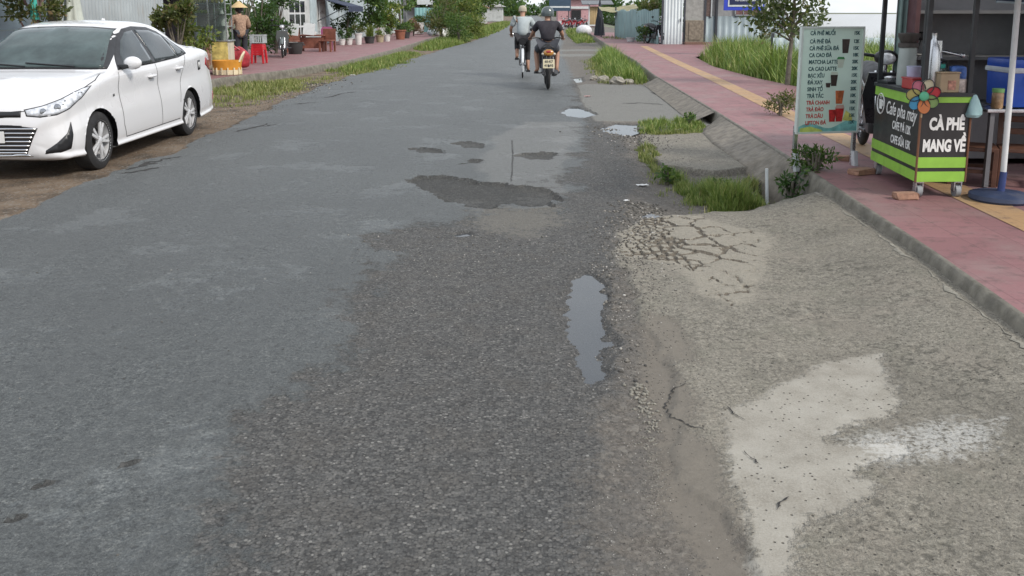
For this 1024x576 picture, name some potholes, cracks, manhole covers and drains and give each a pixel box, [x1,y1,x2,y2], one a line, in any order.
pothole [30,479,56,490]
crack [663,383,702,428]
pothole [0,513,29,524]
pothole [405,174,567,209]
pothole [513,151,558,160]
pothole [555,106,599,118]
pothole [553,267,625,391]
pothole [117,459,142,469]
pothole [594,122,643,137]
